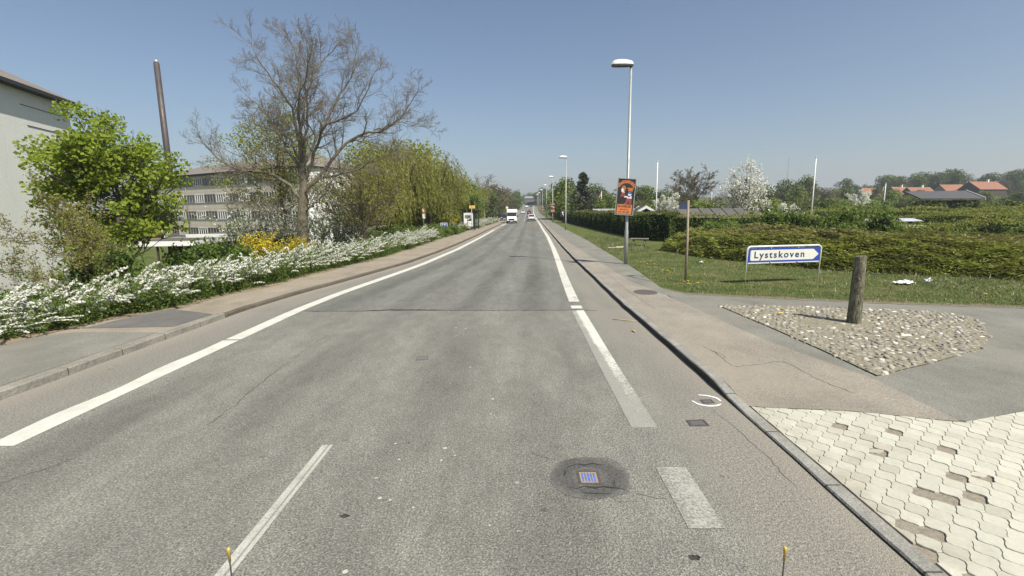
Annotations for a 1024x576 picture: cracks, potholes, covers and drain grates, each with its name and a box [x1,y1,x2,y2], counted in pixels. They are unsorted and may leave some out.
drain grate [686,419,710,427]
crack [207,338,323,427]
crack [529,451,663,499]
